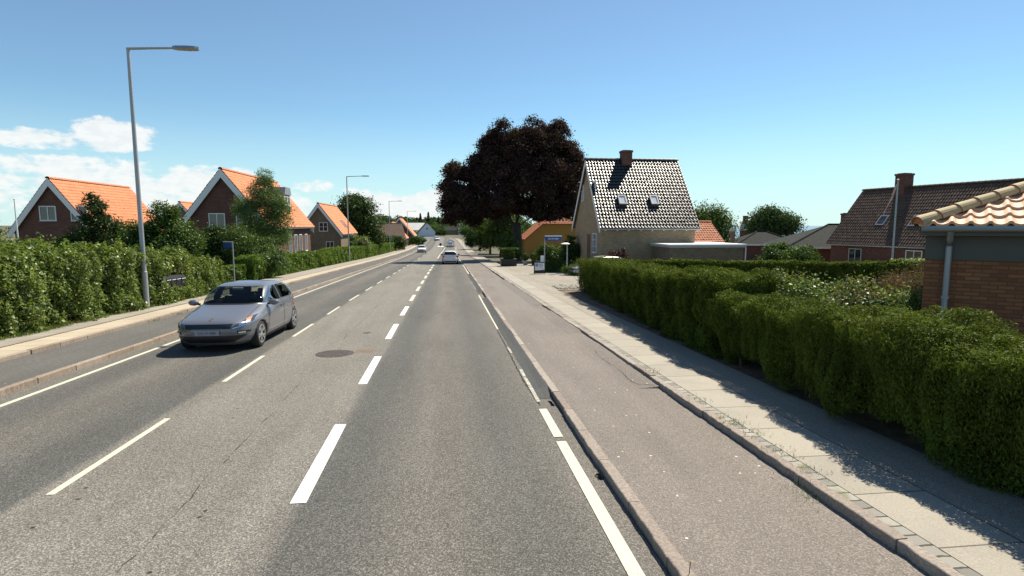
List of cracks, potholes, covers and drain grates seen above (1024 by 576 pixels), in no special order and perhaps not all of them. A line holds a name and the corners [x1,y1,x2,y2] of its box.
crack [117,385,298,573]
